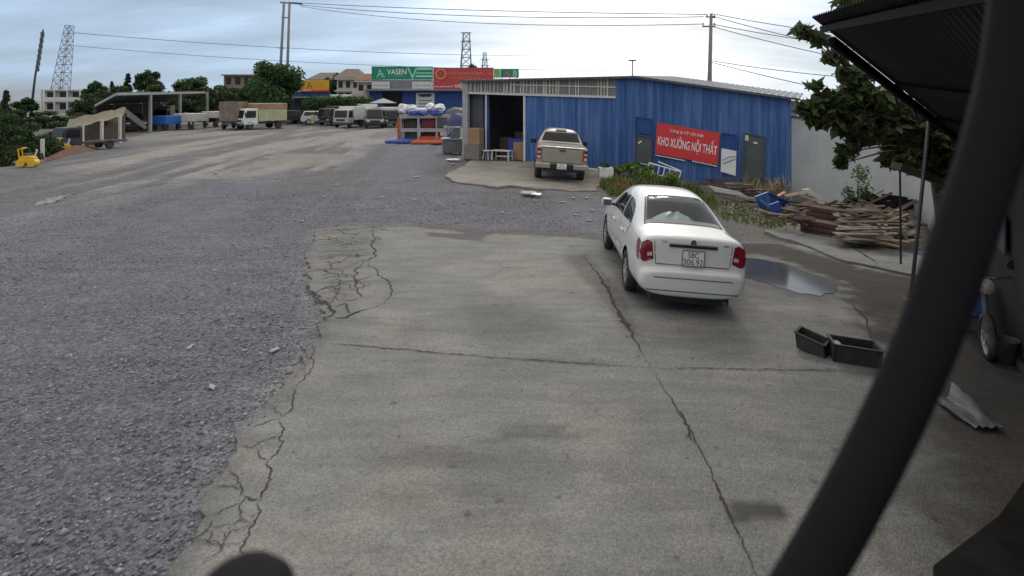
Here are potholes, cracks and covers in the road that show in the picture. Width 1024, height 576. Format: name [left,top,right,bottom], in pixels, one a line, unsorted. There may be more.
crack [302,225,402,320]
crack [851,303,875,341]
crack [184,344,315,558]
